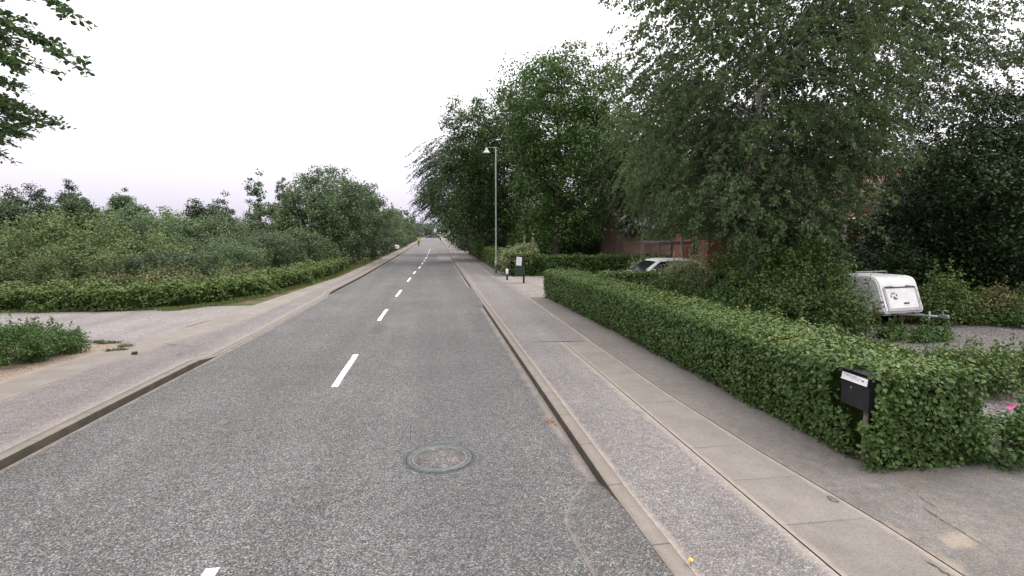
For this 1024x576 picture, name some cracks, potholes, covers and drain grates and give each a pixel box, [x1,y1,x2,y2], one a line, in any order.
manhole cover [404,444,475,474]
